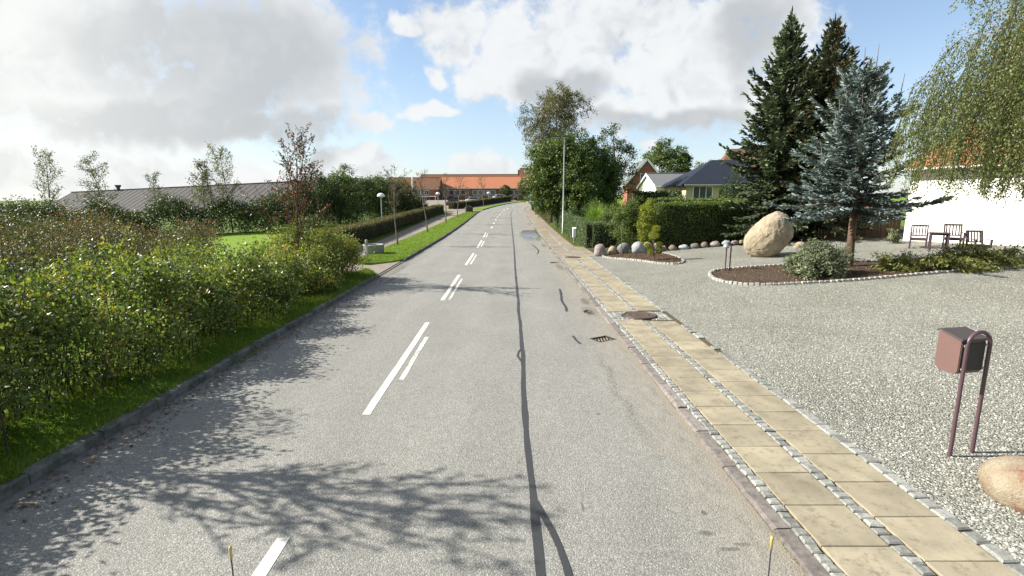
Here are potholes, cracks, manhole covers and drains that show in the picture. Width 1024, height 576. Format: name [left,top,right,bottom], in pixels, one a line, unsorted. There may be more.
manhole cover [623,311,657,320]
